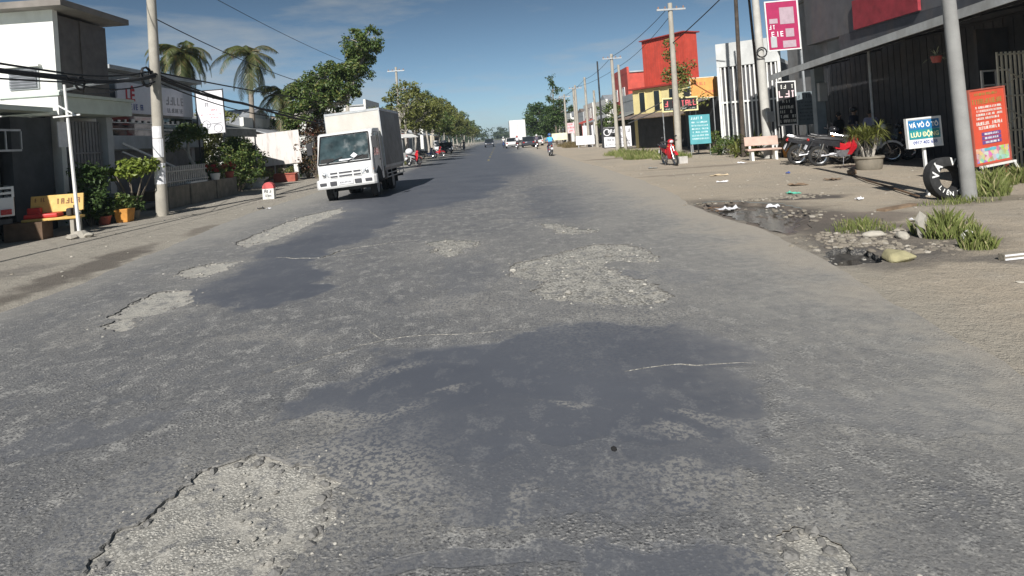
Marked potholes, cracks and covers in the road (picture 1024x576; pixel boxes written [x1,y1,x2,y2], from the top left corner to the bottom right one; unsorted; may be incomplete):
pothole [535,223,598,235]
pothole [69,445,373,576]
pothole [163,261,243,279]
crack [256,329,513,378]
pothole [232,207,344,248]
pothole [86,289,204,337]
crack [628,361,755,371]
pothole [425,239,481,257]
pothole [824,248,884,266]
pothole [503,243,675,315]
